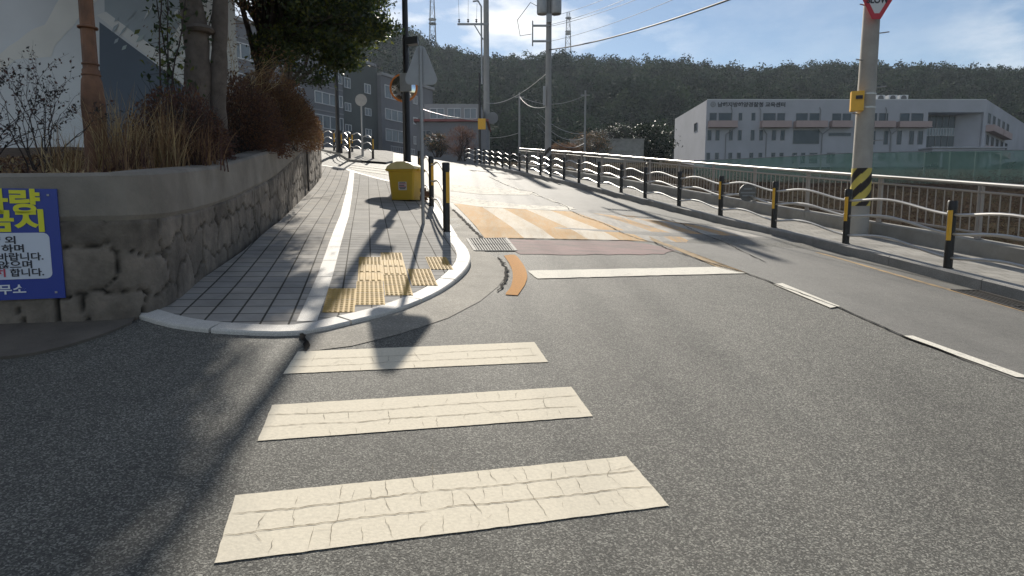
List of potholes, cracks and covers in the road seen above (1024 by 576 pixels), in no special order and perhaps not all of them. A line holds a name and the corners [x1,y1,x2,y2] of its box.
drain grate [951,289,1024,311]
drain grate [466,237,517,251]
